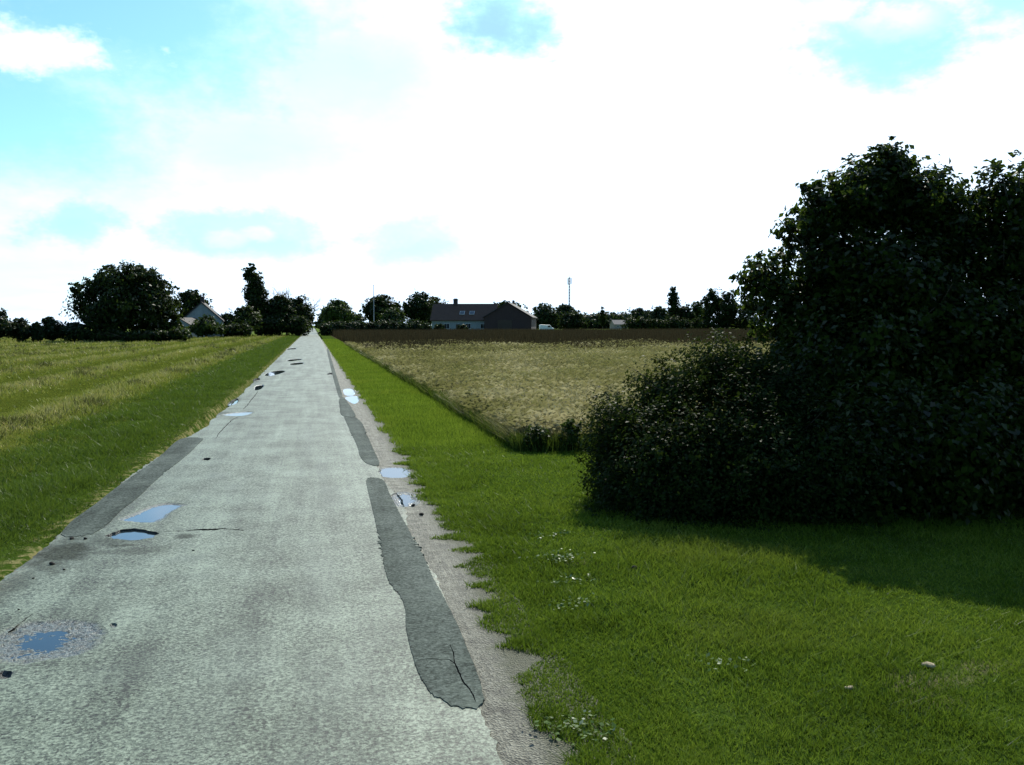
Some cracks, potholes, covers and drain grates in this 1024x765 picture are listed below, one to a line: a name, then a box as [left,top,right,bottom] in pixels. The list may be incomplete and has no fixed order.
pothole [391,492,421,507]
pothole [378,467,411,478]
pothole [106,528,159,540]
pothole [117,502,188,523]
crack [417,645,476,702]
pothole [0,617,109,665]
